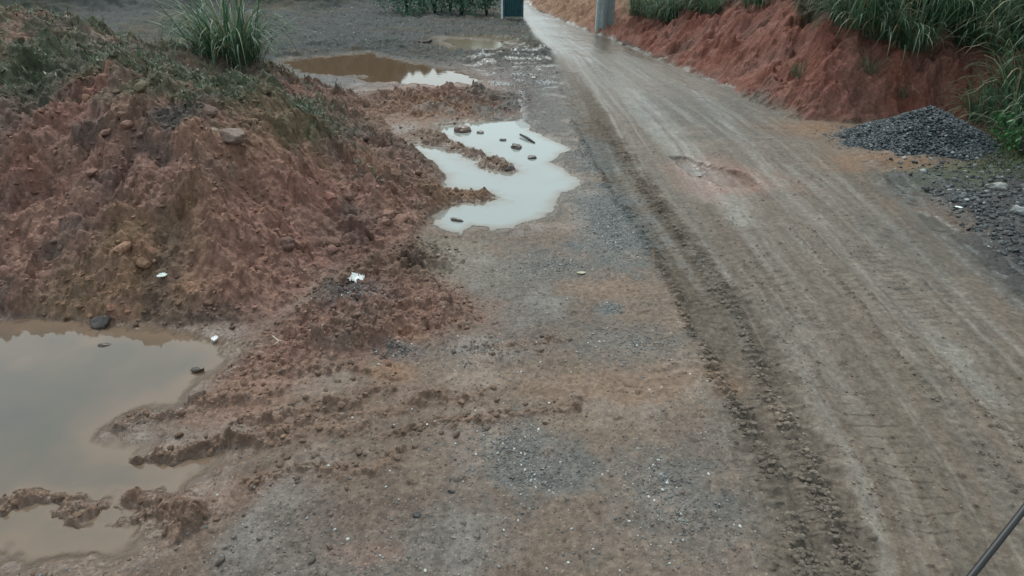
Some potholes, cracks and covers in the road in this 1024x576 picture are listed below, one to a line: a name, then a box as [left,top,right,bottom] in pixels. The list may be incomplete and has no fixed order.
pothole [670,155,763,188]
